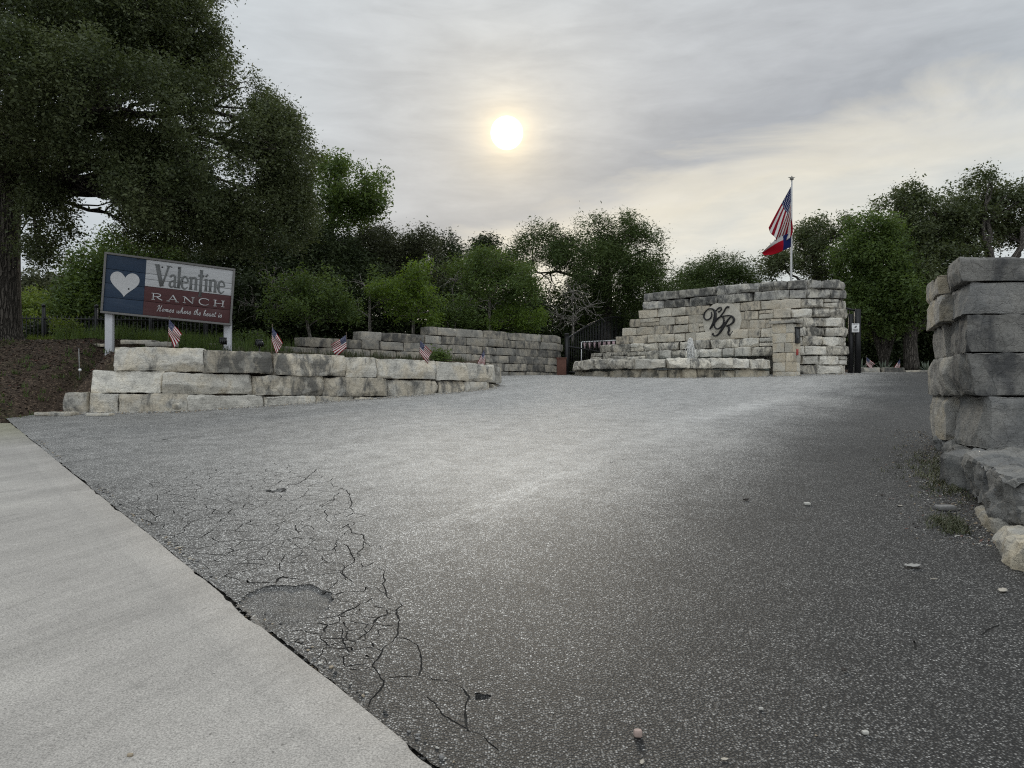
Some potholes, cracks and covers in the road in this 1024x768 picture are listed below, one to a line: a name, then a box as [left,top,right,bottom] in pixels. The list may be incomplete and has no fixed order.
crack [22,432,499,768]
pothole [235,584,339,632]
